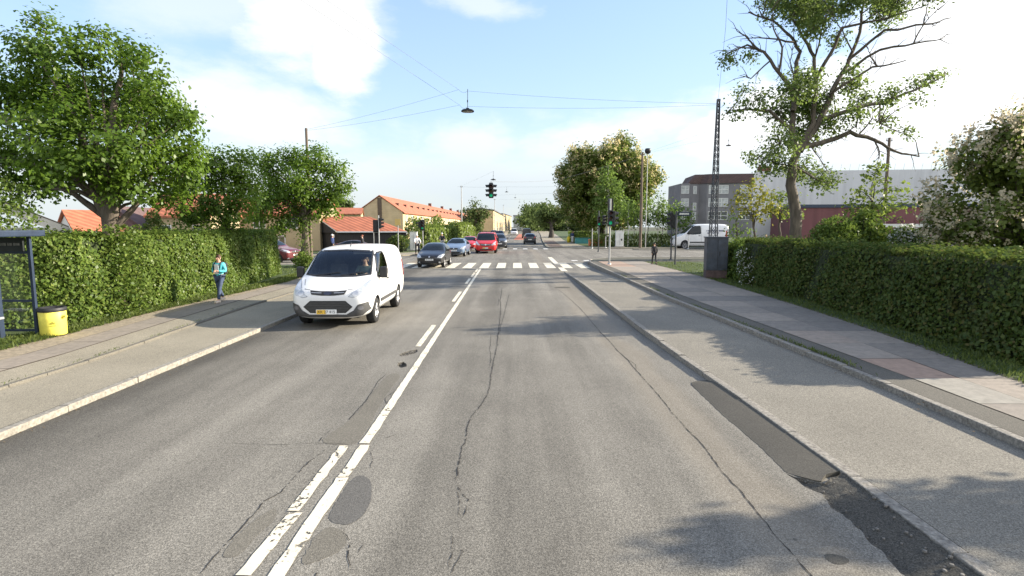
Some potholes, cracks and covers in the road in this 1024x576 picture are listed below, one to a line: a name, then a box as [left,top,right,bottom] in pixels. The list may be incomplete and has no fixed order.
pothole [787,473,980,576]
crack [554,287,813,576]
crack [455,291,509,514]
